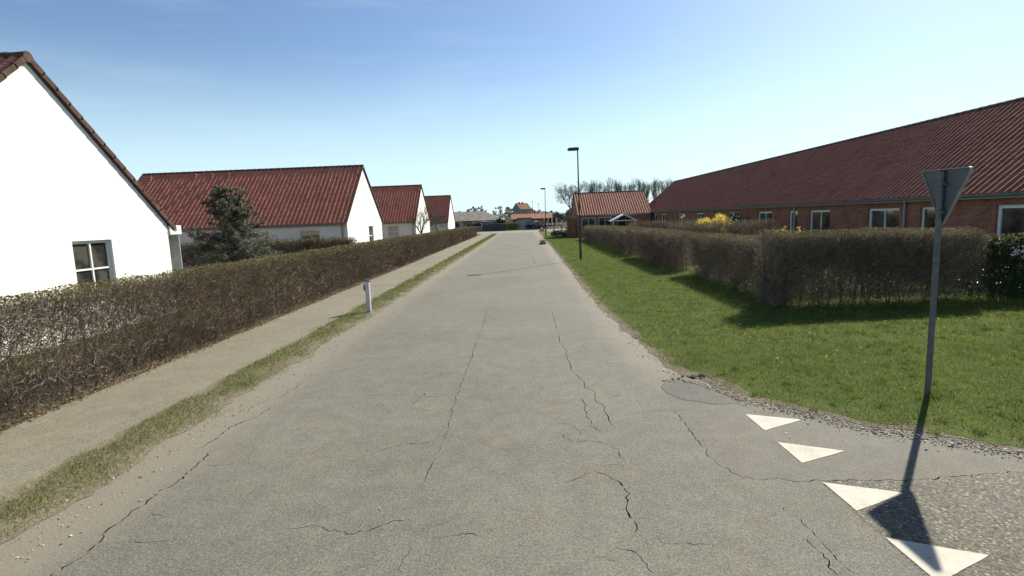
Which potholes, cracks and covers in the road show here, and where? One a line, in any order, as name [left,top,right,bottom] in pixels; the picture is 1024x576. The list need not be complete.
crack [552,312,710,575]
crack [371,313,487,482]
crack [296,519,410,535]
crack [797,512,850,576]
crack [50,357,334,576]
